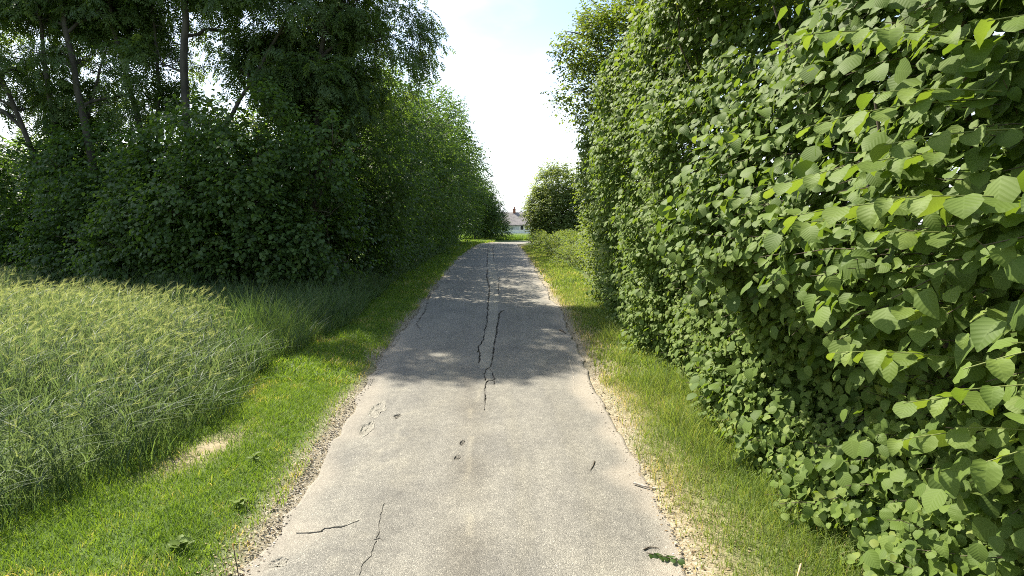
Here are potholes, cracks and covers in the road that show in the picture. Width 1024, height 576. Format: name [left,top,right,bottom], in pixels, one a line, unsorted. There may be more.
crack [296,503,385,572]
crack [478,248,504,401]
